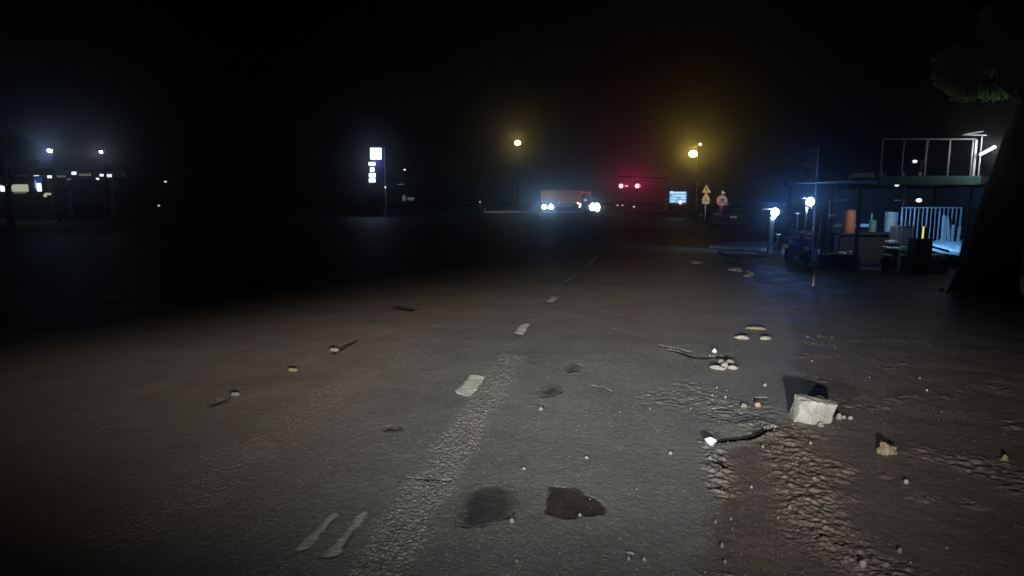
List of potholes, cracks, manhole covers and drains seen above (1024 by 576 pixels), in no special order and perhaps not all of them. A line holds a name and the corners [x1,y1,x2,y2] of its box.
pothole [536,385,564,397]
pothole [543,486,606,519]
